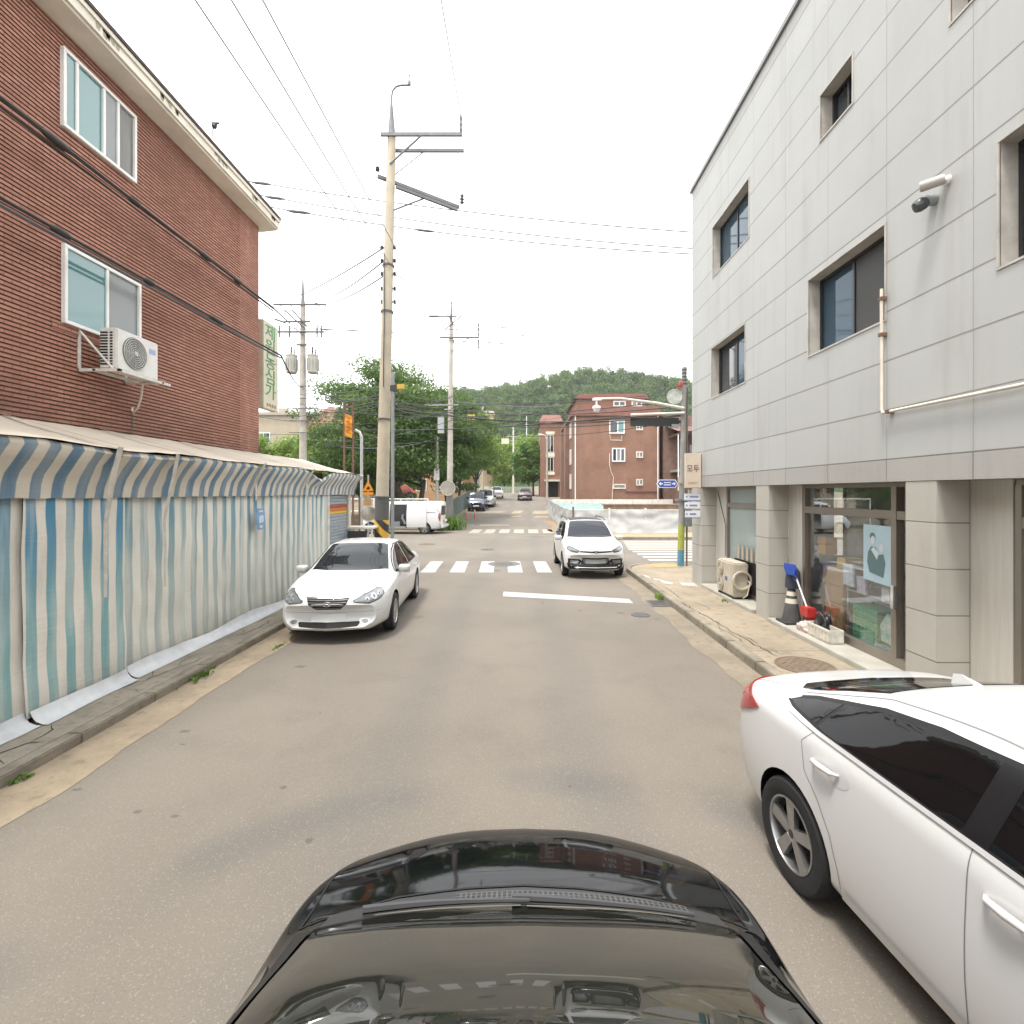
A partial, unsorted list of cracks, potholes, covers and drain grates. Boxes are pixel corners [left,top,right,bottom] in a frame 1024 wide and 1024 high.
crack [664,587,780,654]
crack [0,724,53,764]
manhole cover [774,656,837,673]
